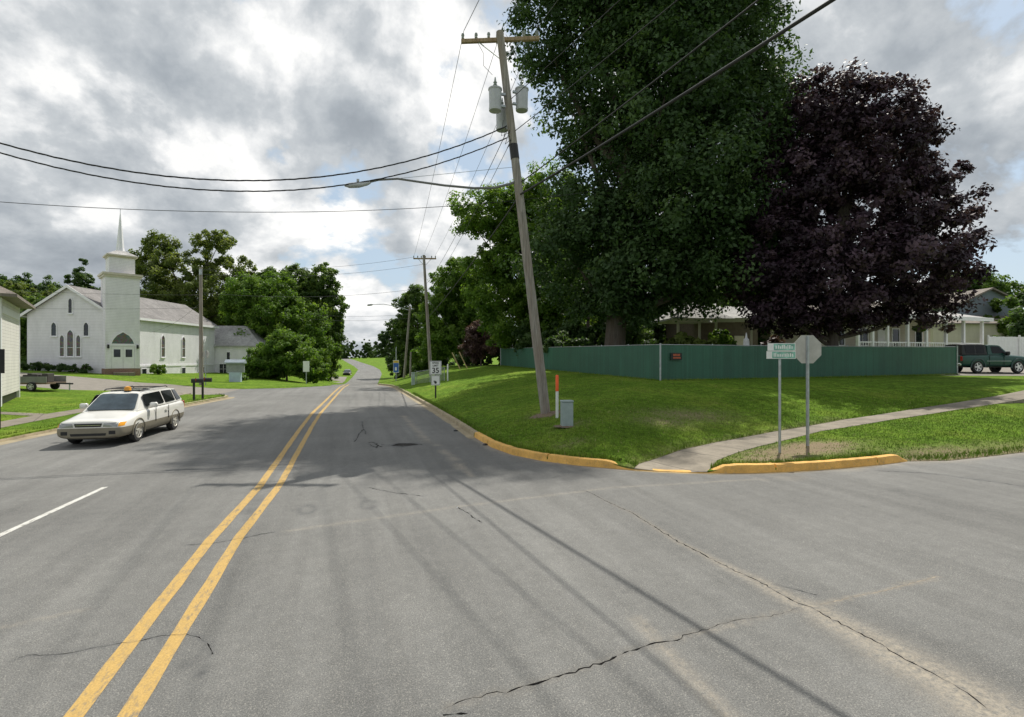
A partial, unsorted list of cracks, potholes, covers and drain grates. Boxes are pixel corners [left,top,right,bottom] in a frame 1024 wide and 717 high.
crack [443,494,985,716]
crack [19,634,213,658]
